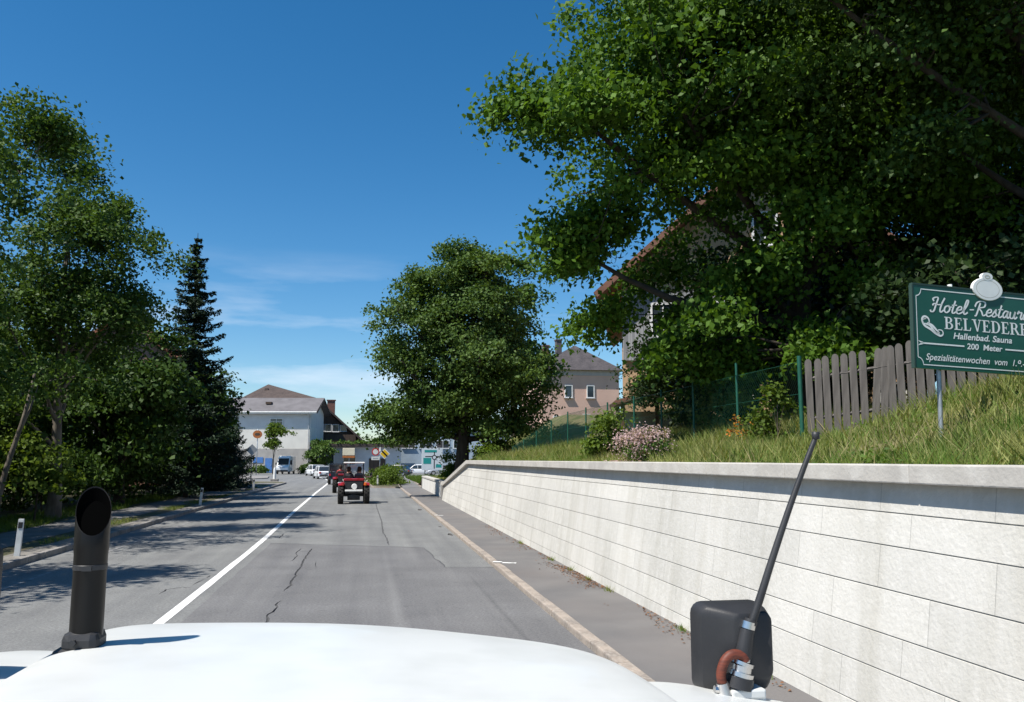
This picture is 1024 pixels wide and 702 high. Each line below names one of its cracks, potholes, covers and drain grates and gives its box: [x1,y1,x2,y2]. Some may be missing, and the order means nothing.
crack [265,534,316,623]
